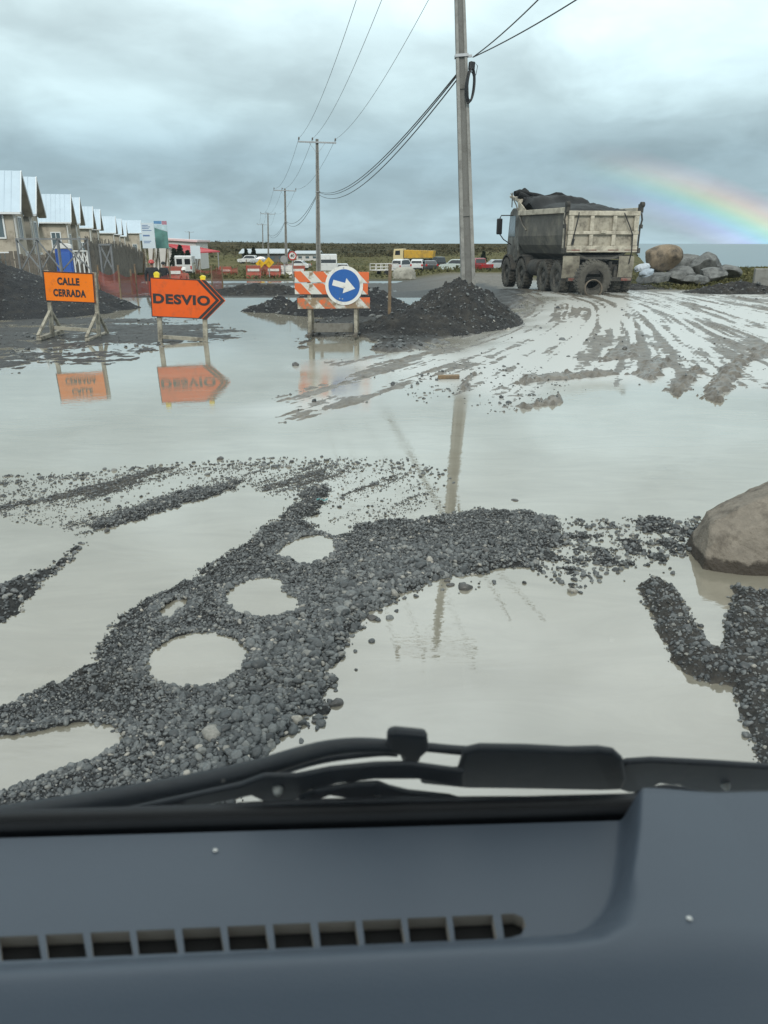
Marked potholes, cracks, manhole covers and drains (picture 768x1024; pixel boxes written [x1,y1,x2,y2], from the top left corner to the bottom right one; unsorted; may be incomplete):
pothole [130,626,250,692]
pothole [154,593,188,624]
pothole [270,532,340,567]
pothole [217,574,299,621]
